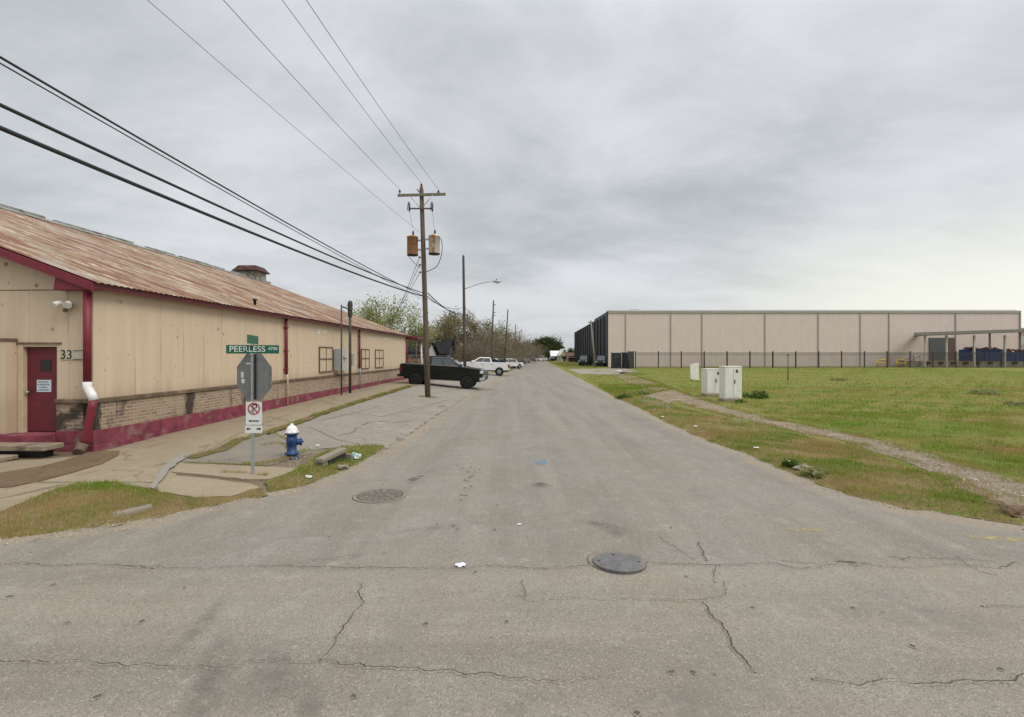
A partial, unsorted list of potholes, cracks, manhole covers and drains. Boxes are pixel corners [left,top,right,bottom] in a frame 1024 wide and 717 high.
manhole cover [587,549,647,575]
crack [812,673,1024,688]
crack [0,536,1024,685]
manhole cover [352,488,407,503]
